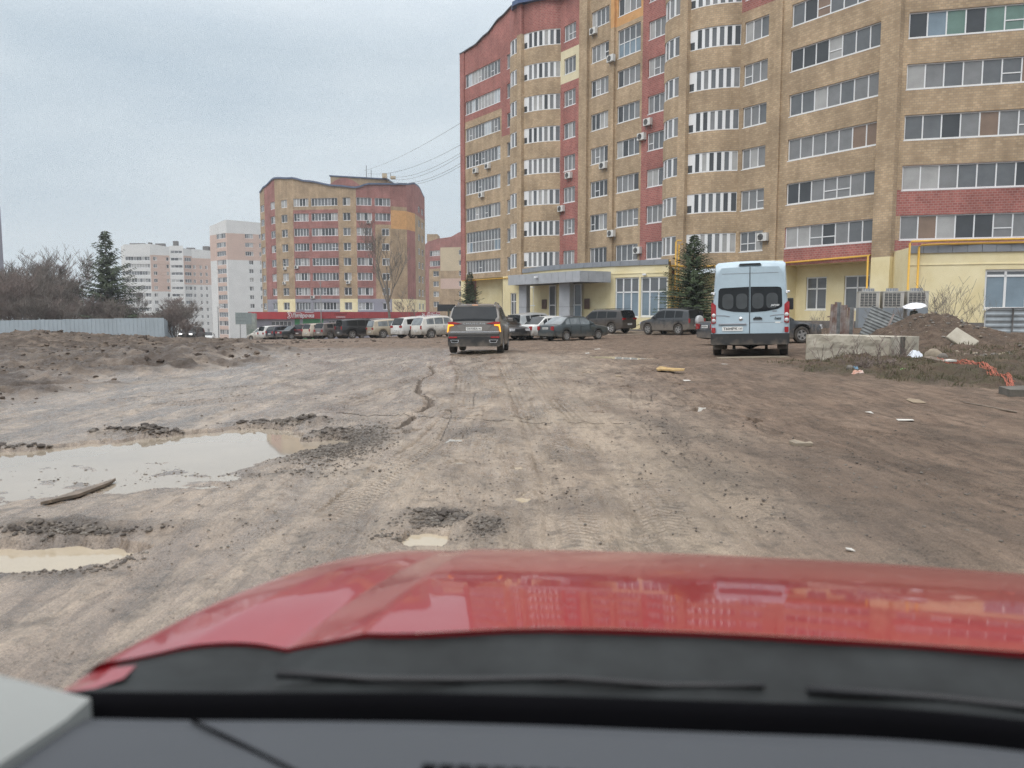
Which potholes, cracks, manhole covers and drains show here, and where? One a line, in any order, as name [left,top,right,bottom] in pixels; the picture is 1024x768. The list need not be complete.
pothole [0,533,156,574]
pothole [397,527,456,547]
pothole [0,422,357,506]
crack [340,365,624,429]
